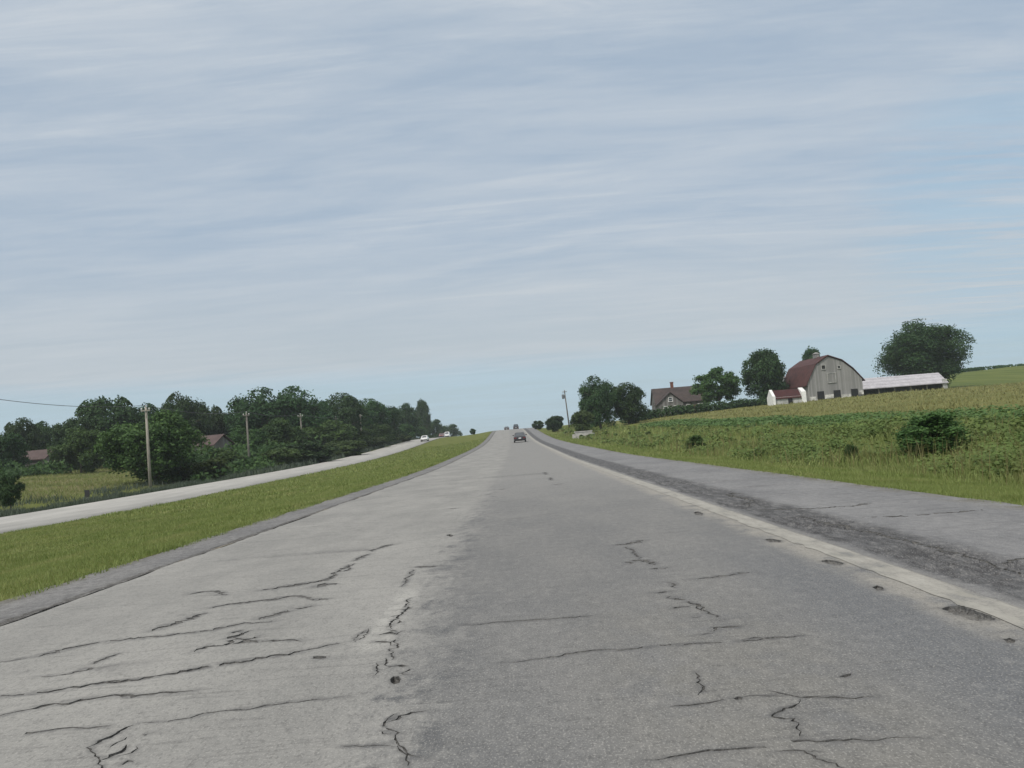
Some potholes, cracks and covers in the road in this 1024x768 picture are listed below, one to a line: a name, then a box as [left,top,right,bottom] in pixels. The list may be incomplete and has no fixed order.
pothole [941,606,995,621]
crack [726,493,1024,575]
crack [502,540,802,663]
crack [656,673,917,768]
crack [0,544,436,768]
